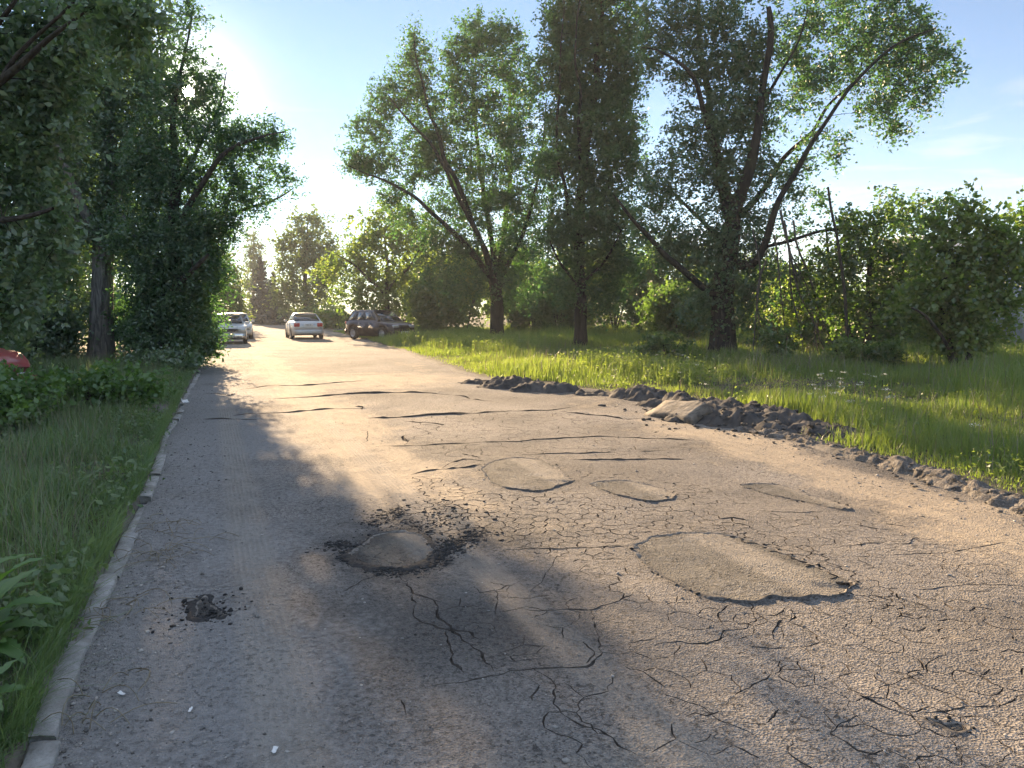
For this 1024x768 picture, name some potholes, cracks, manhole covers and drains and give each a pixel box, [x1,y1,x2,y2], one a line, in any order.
crack [208,381,715,474]
pothole [180,594,246,623]
crack [374,472,1024,768]
